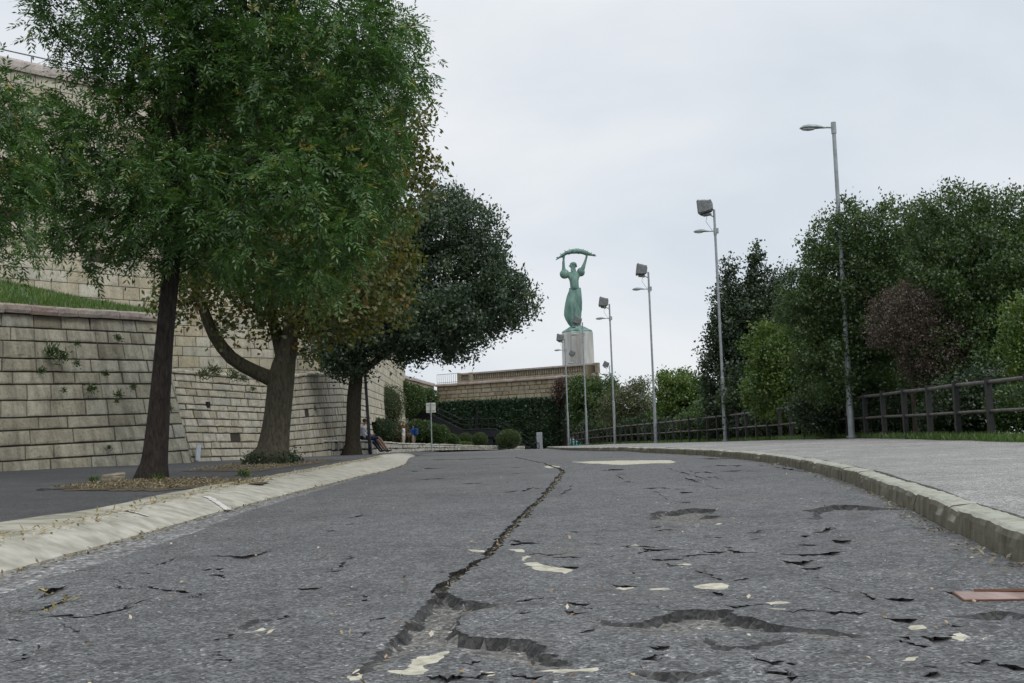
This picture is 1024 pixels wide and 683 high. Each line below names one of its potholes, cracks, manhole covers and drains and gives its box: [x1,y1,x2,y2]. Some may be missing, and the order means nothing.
pothole [351,591,575,676]
pothole [589,606,865,640]
pothole [802,505,903,522]
crack [425,661,543,683]
crack [516,596,599,633]
pothole [649,508,725,526]
crack [506,531,596,569]
crack [353,595,389,638]
